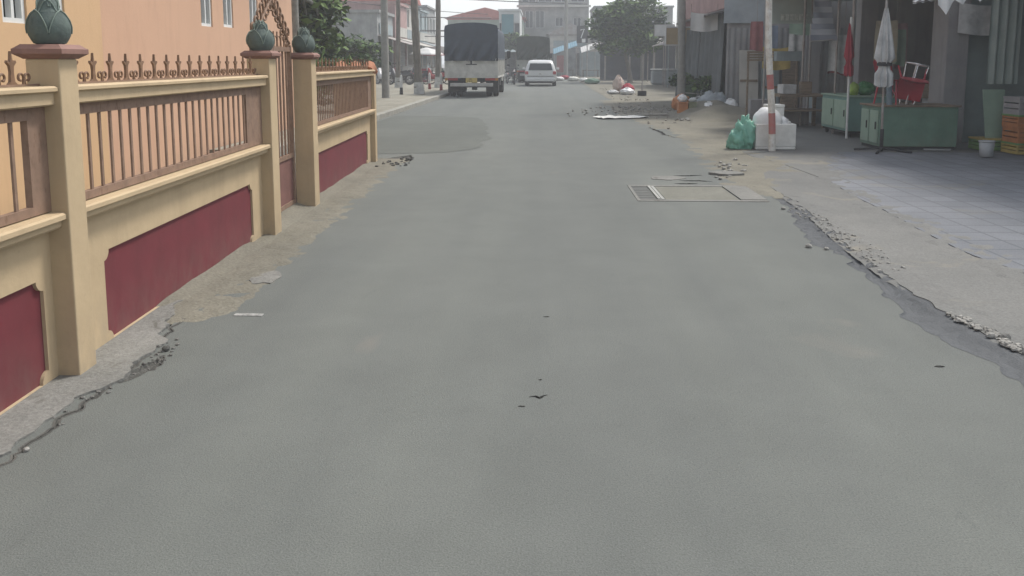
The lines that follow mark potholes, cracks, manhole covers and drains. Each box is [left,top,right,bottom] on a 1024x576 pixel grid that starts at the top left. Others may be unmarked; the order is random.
pothole [118,355,166,383]
manhole cover [627,185,769,202]
pothole [776,196,1024,386]
